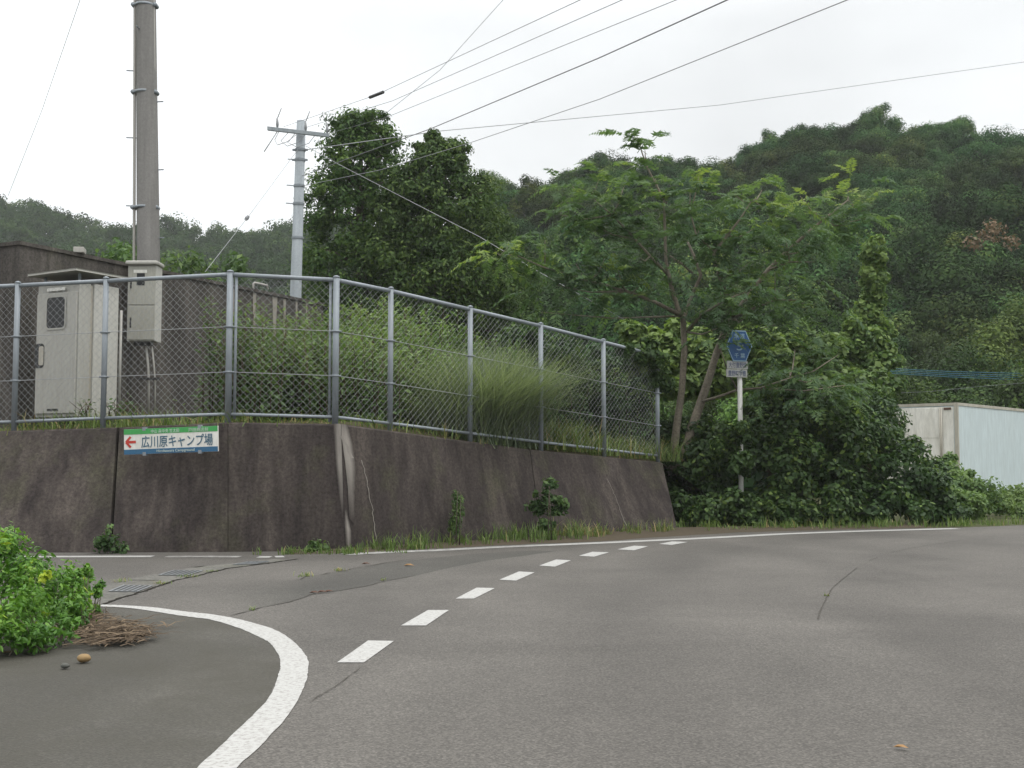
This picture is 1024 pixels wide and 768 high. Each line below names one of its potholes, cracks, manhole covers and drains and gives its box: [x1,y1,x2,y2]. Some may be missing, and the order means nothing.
crack [817,534,1024,619]
